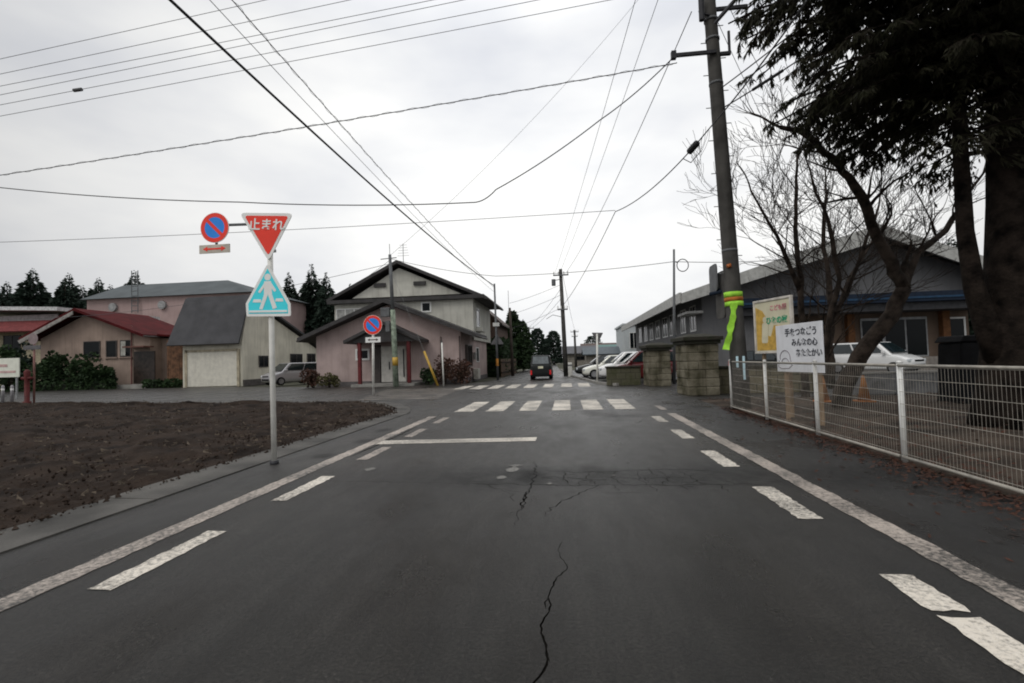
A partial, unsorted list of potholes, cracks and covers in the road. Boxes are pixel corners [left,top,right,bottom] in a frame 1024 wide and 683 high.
crack [339,463,760,527]
crack [532,542,568,683]
